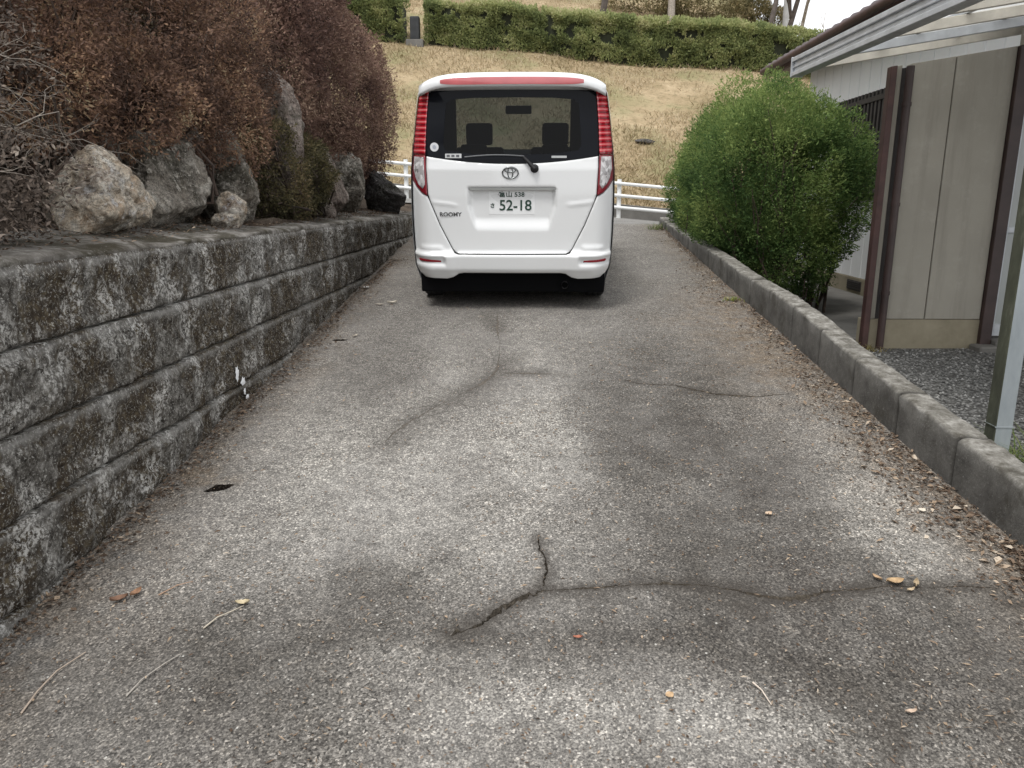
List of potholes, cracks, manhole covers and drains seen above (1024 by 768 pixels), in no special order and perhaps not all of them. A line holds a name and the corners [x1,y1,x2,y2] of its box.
crack [451,537,992,636]
crack [384,315,535,443]
crack [626,380,783,397]
